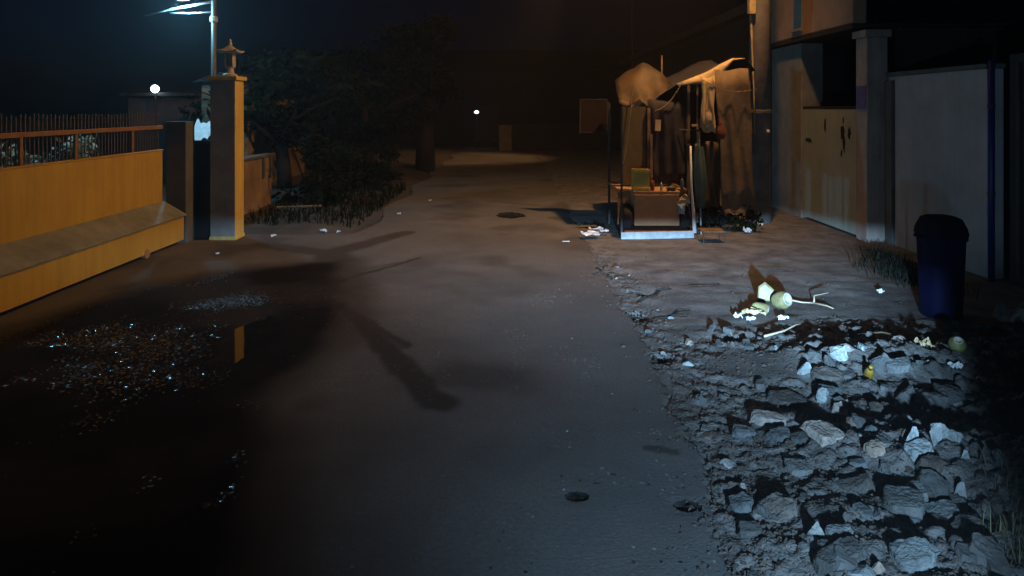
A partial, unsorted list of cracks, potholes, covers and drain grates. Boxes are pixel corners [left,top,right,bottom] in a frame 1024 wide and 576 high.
pothole [556,488,597,505]
crack [593,267,690,320]
